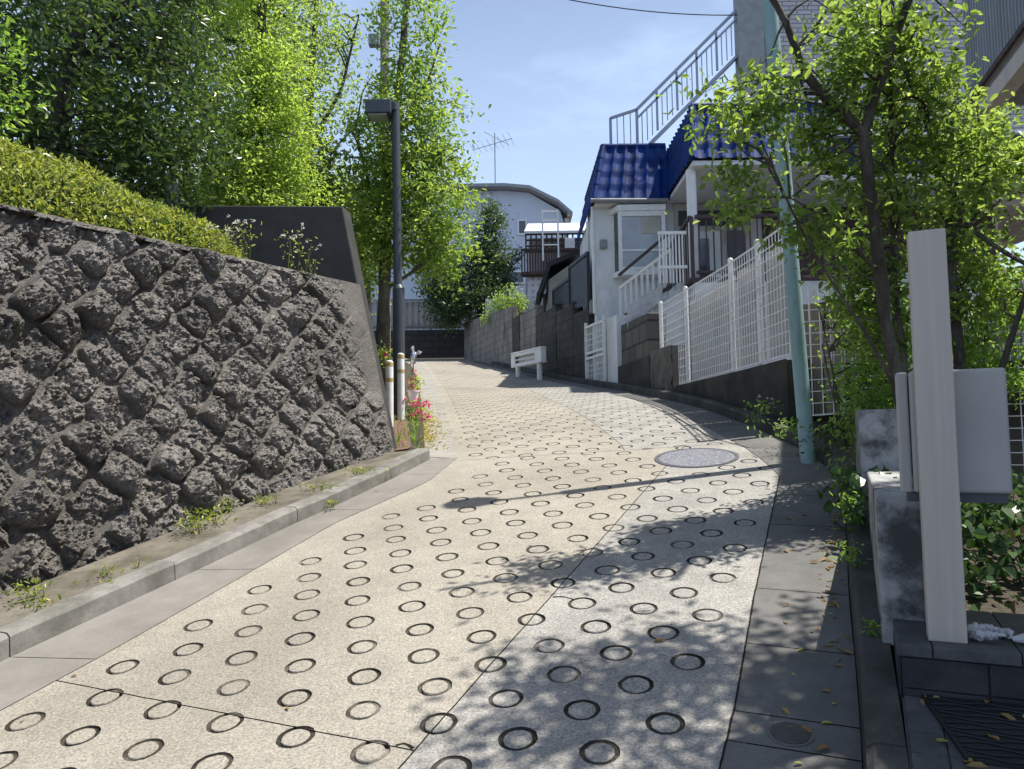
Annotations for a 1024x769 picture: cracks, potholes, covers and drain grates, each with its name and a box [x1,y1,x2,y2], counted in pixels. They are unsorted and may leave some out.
manhole cover [654,448,739,468]
manhole cover [767,720,814,747]
